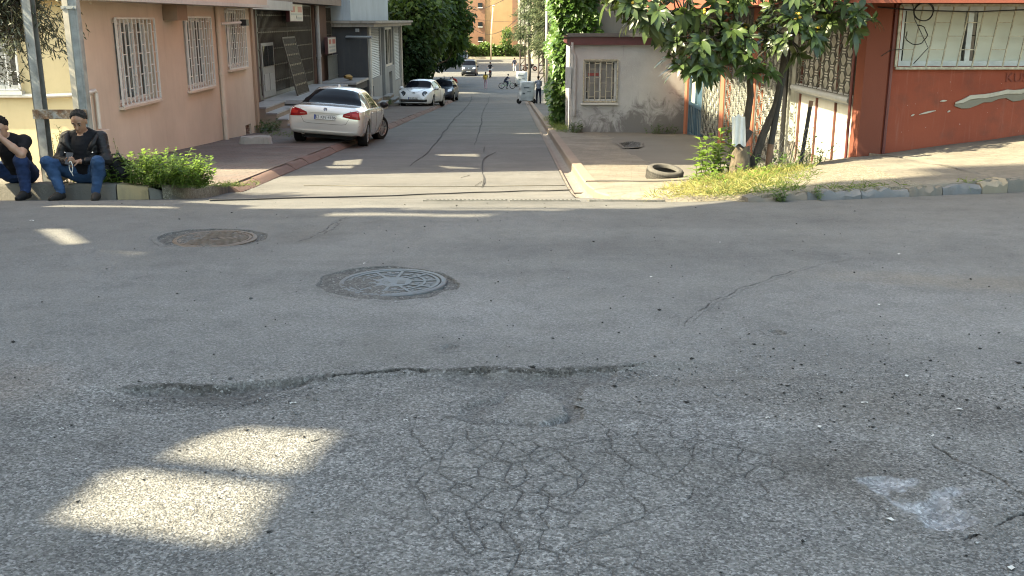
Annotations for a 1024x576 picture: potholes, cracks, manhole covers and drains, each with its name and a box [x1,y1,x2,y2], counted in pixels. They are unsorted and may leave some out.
manhole cover [309,265,467,302]
pothole [109,371,332,406]
crack [678,256,853,328]
manhole cover [150,227,274,248]
pothole [427,363,627,431]
crack [106,359,826,576]
